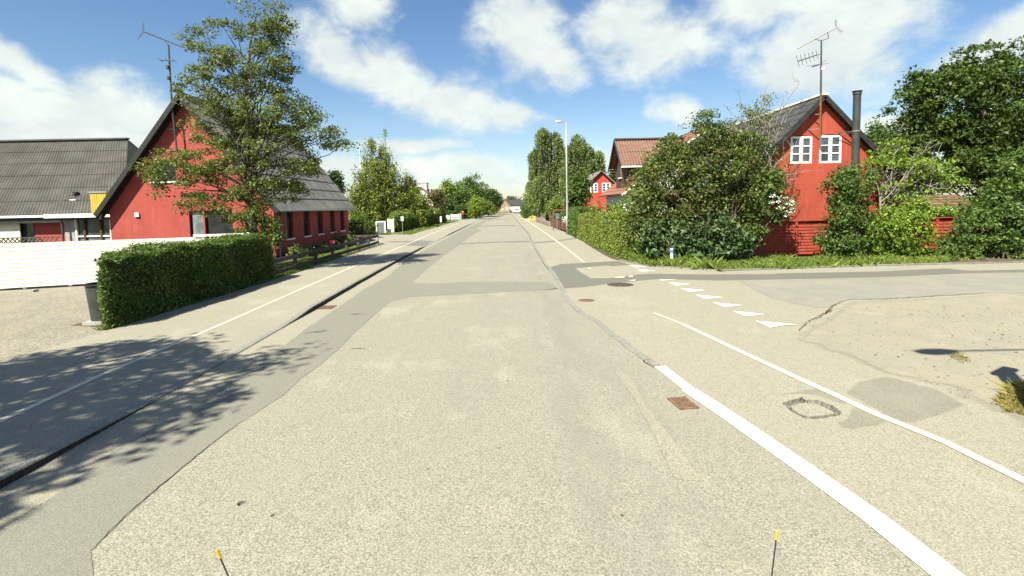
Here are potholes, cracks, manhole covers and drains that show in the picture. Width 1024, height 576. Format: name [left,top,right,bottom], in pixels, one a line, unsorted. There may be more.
crack [799,293,978,330]
